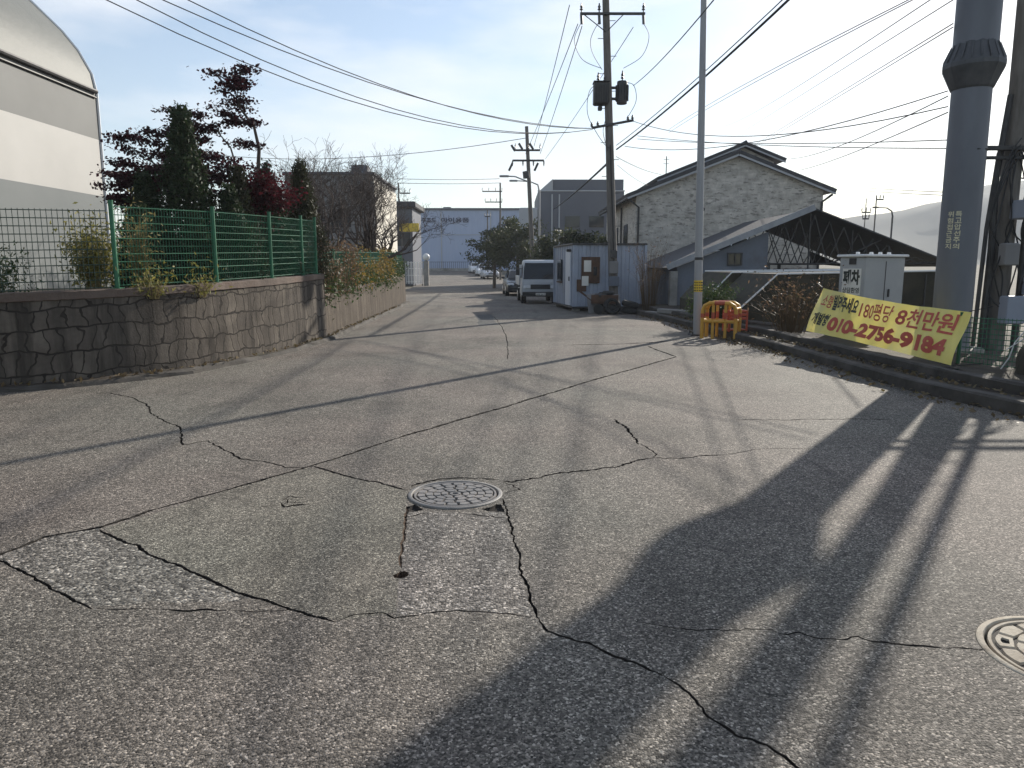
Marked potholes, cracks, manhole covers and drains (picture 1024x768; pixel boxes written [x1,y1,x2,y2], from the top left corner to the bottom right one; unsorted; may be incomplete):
manhole cover [975,616,1024,676]
manhole cover [408,480,503,509]
crack [0,393,983,768]
